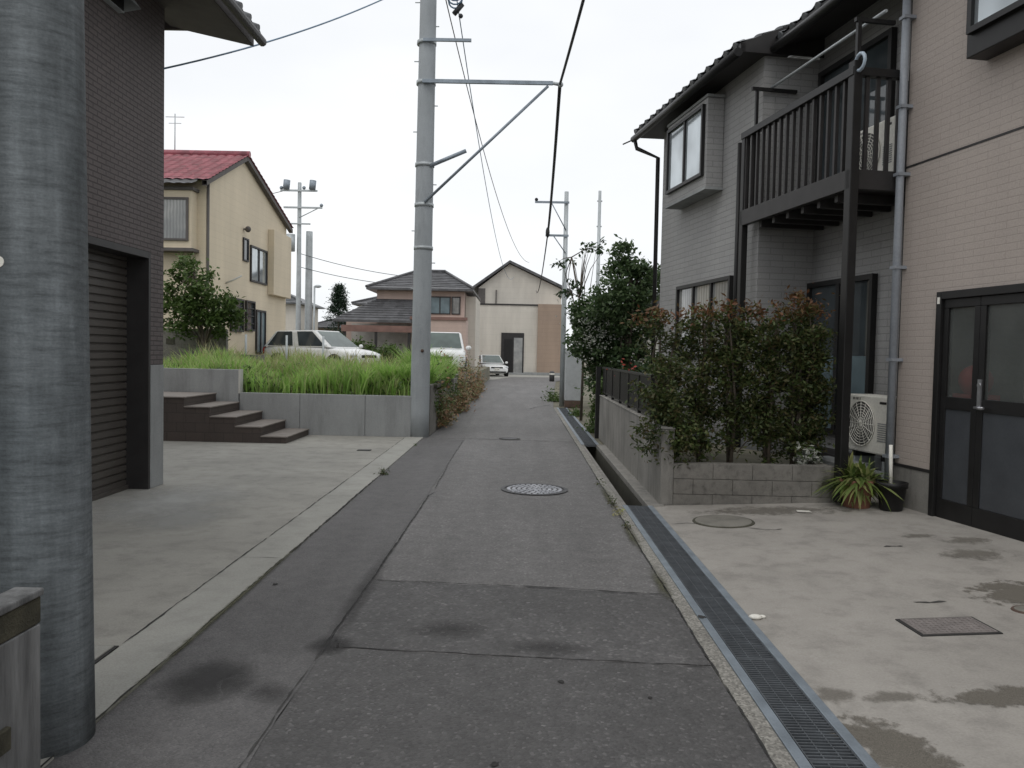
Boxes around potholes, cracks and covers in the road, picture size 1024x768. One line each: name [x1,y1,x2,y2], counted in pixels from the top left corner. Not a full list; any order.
manhole cover [692,515,755,528]
drain grate [664,556,724,598]
drain grate [643,527,690,557]
manhole cover [501,483,568,495]
manhole cover [895,617,1003,637]
drain grate [736,658,860,762]
drain grate [580,438,596,447]
drain grate [809,760,866,768]
drain grate [693,597,775,659]
drain grate [628,506,666,528]
